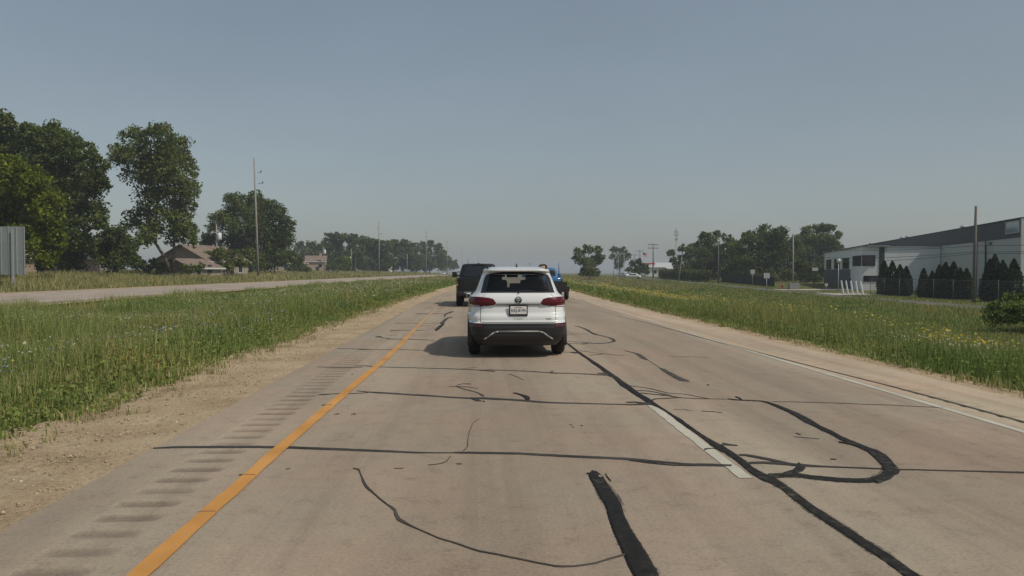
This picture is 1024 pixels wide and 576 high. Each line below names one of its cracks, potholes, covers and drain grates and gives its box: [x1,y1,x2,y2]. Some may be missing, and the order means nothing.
crack [449,383,484,397]
crack [353,419,625,567]
crack [629,385,722,413]
